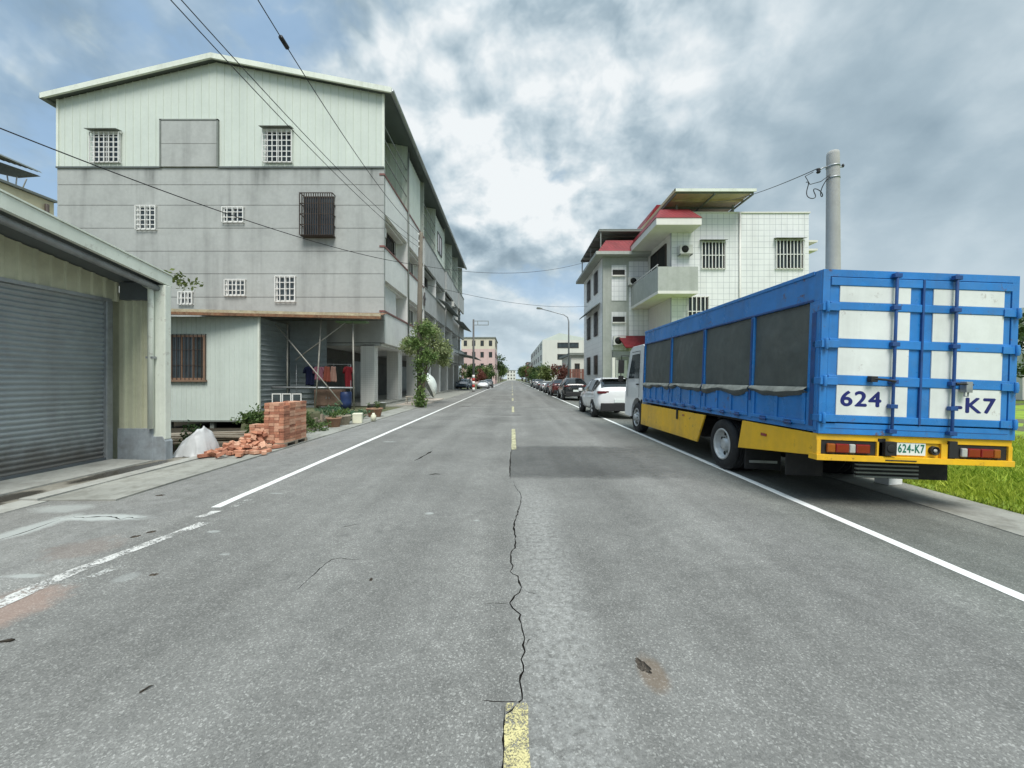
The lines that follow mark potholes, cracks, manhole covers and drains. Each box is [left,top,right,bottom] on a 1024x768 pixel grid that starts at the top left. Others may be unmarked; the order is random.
pothole [635,657,652,674]
crack [483,483,536,768]
